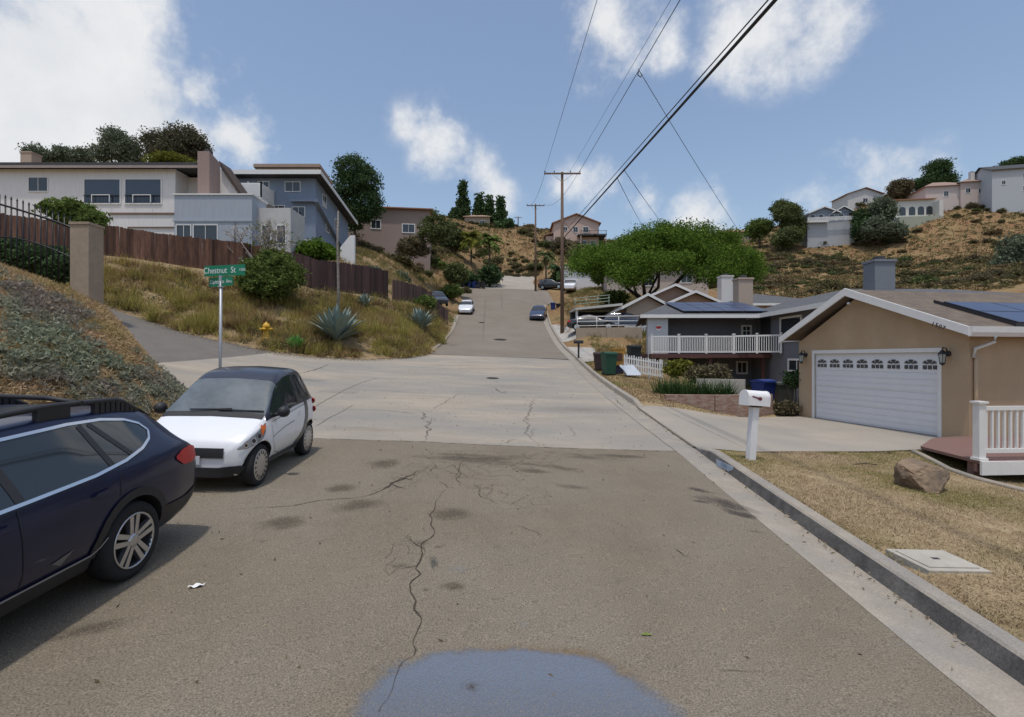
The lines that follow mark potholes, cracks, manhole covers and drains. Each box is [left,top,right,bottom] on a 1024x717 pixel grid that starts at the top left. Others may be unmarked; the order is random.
crack [238,393,557,711]
utility cover [885,549,991,575]
